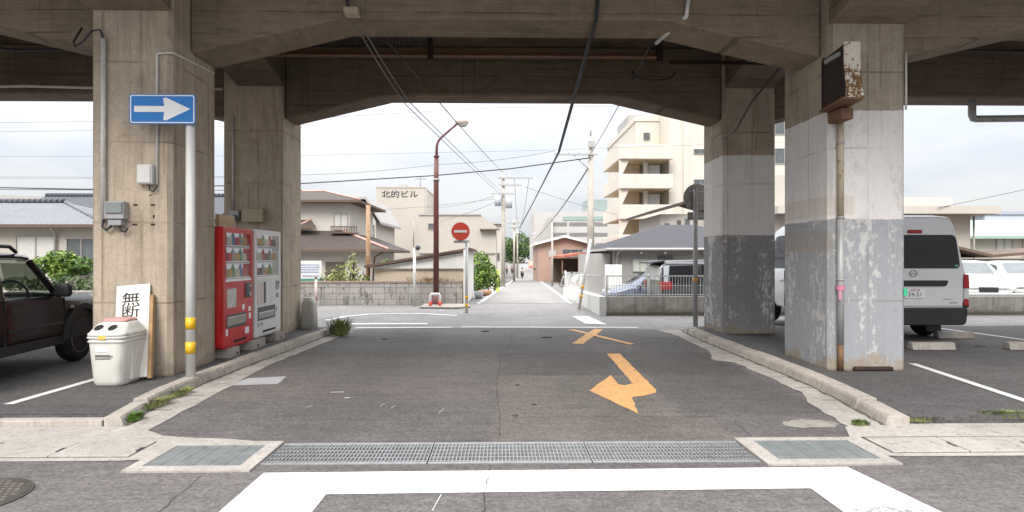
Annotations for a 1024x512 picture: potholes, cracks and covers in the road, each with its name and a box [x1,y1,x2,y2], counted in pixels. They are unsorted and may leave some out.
manhole cover [0,478,35,506]
drain grate [584,441,761,463]
crack [496,335,513,438]
drain grate [428,442,592,464]
drain grate [260,442,434,465]
